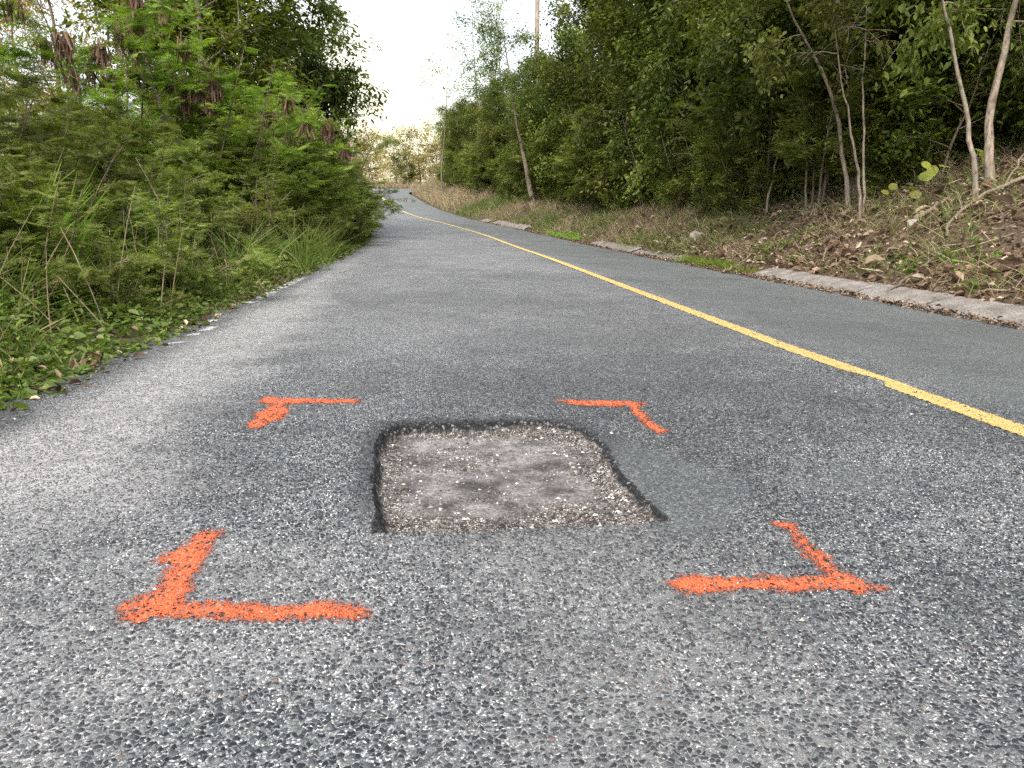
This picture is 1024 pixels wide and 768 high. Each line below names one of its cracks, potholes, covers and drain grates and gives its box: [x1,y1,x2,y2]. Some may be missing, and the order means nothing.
pothole [369,419,671,534]
